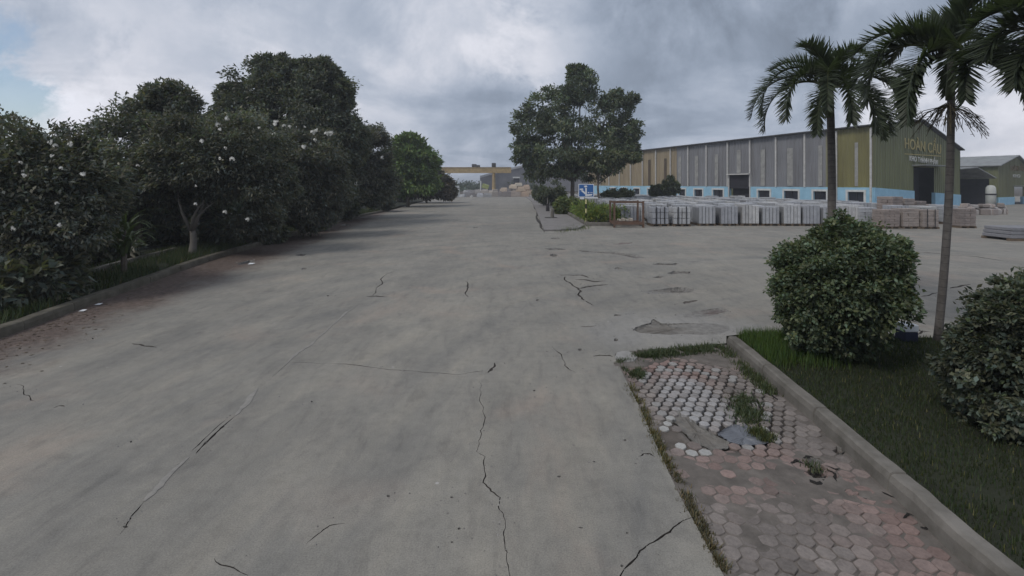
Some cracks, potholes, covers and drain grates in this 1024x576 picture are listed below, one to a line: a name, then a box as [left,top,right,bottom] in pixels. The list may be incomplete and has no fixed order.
crack [290,362,496,374]
crack [620,517,694,576]
crack [476,379,510,576]
pothole [718,424,768,446]
